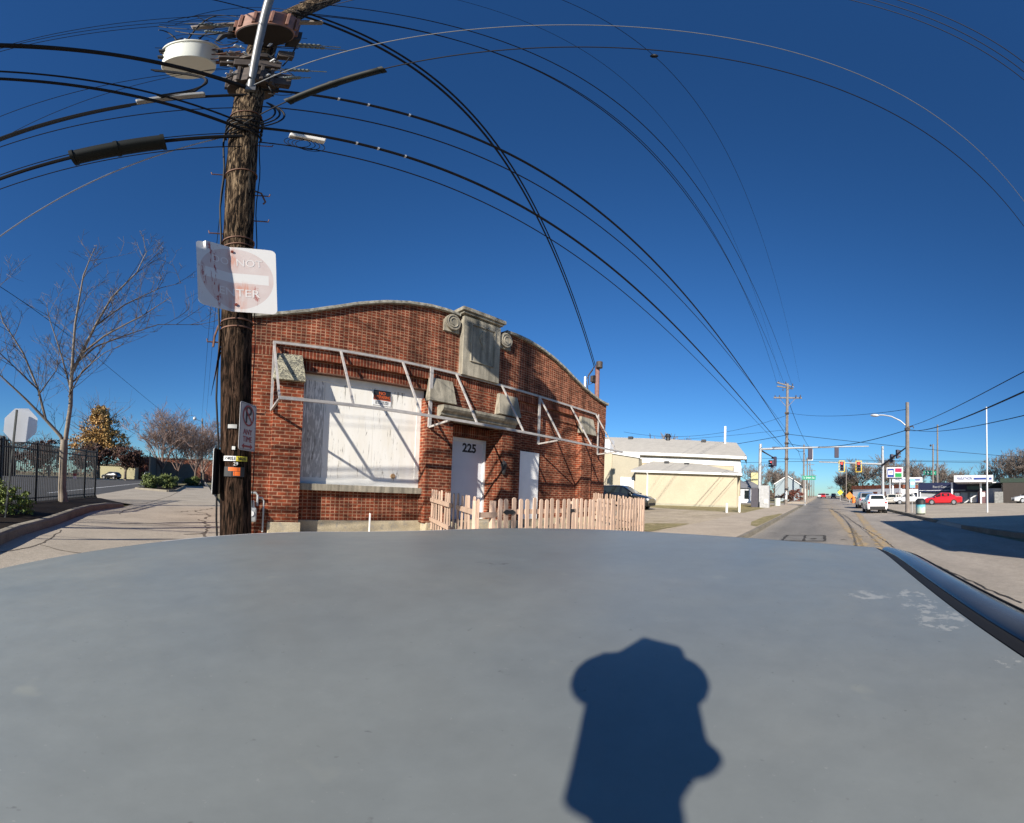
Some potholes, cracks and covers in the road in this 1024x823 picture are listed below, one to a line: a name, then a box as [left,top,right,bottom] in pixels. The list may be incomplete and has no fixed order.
crack [0,530,78,553]
crack [119,508,213,537]
